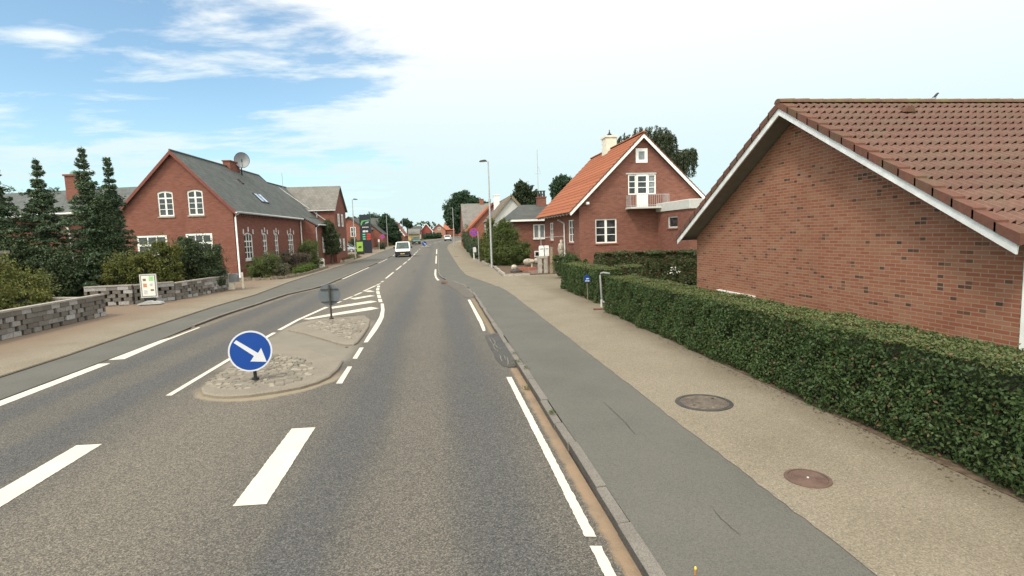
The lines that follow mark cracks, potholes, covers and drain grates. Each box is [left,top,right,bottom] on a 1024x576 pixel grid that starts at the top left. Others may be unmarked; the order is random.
manhole cover [784,469,833,489]
manhole cover [675,394,734,412]
